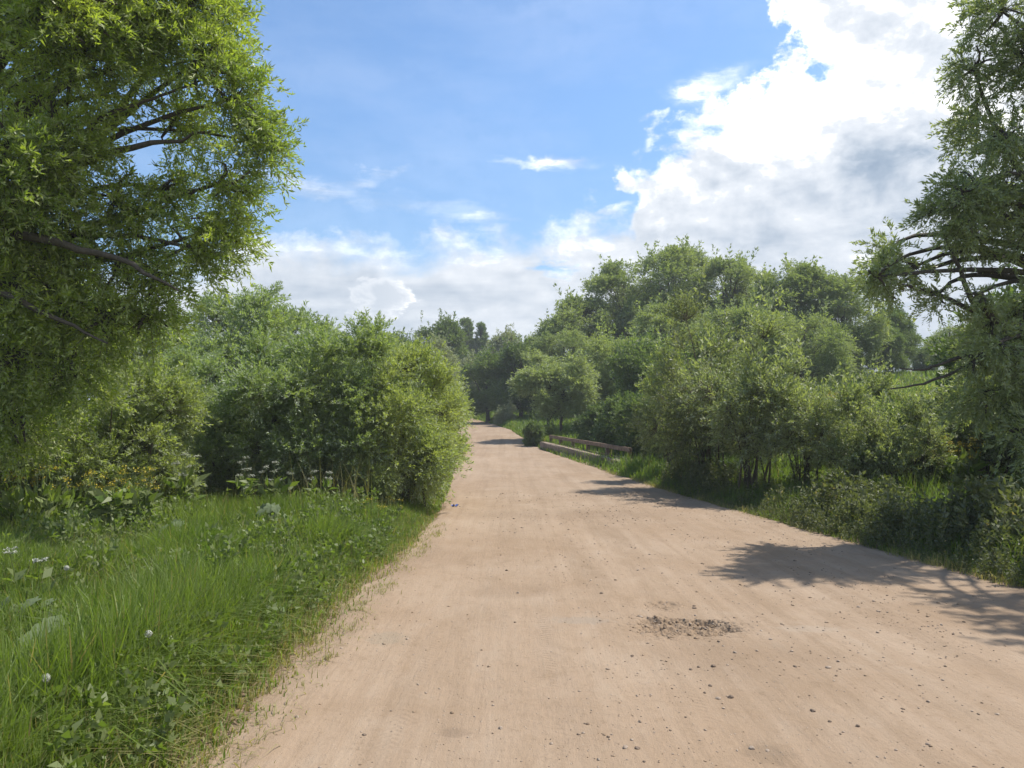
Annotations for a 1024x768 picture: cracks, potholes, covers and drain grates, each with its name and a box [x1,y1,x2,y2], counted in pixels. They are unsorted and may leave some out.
pothole [607,613,762,641]
